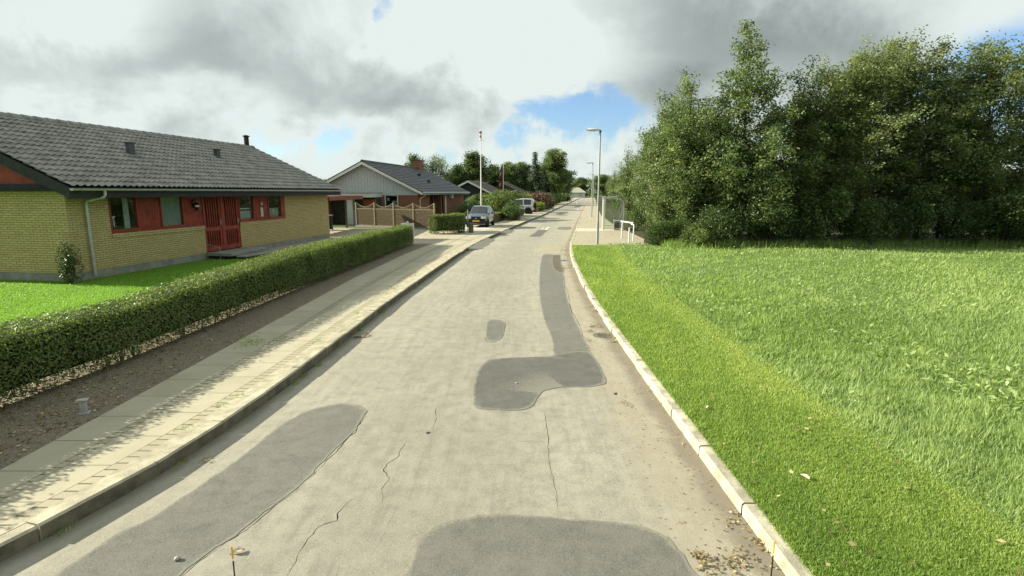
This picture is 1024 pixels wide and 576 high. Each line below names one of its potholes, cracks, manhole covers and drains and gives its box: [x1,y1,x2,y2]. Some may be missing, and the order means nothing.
crack [519,416,558,508]
crack [184,411,368,575]
crack [287,444,405,575]
